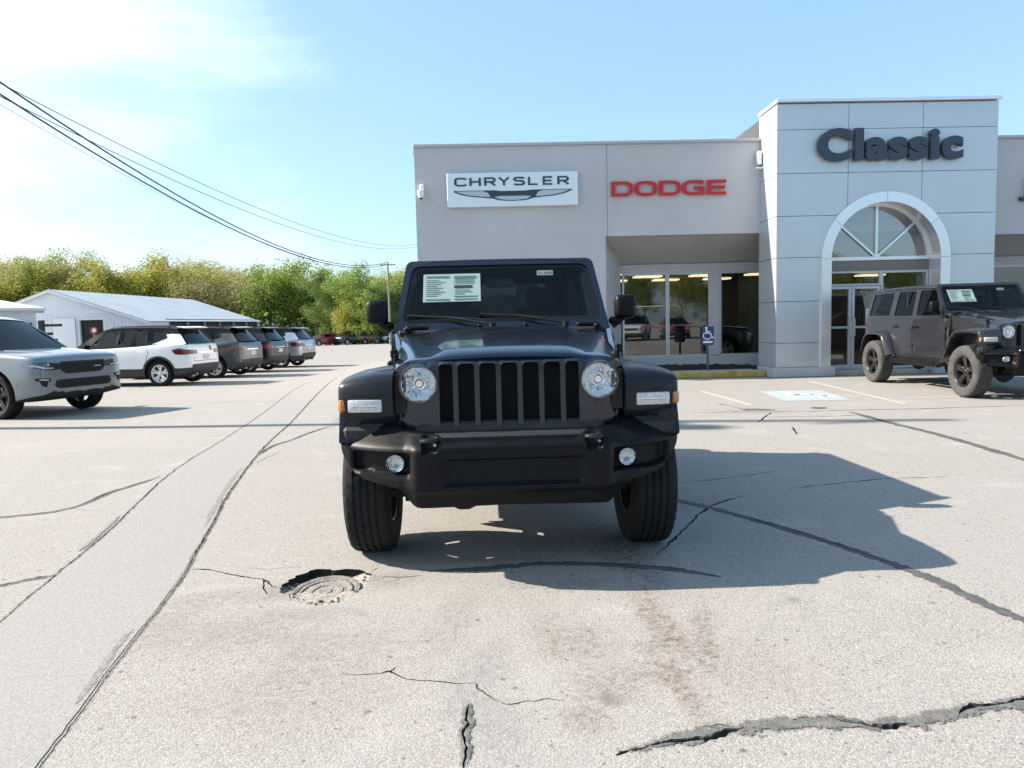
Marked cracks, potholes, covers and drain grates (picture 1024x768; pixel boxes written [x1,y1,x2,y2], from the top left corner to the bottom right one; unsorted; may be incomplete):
crack [350,667,562,768]
manhole cover [290,575,361,595]
crack [691,471,926,489]
crack [657,495,747,554]
crack [197,567,285,594]
